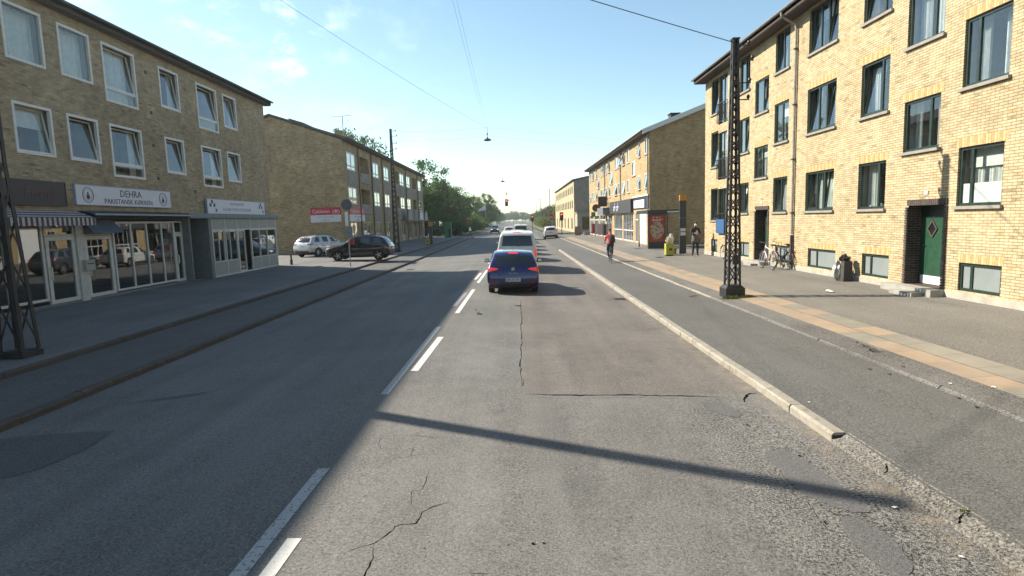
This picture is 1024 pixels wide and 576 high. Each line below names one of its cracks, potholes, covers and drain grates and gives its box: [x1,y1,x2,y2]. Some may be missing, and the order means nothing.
crack [348,477,453,576]
